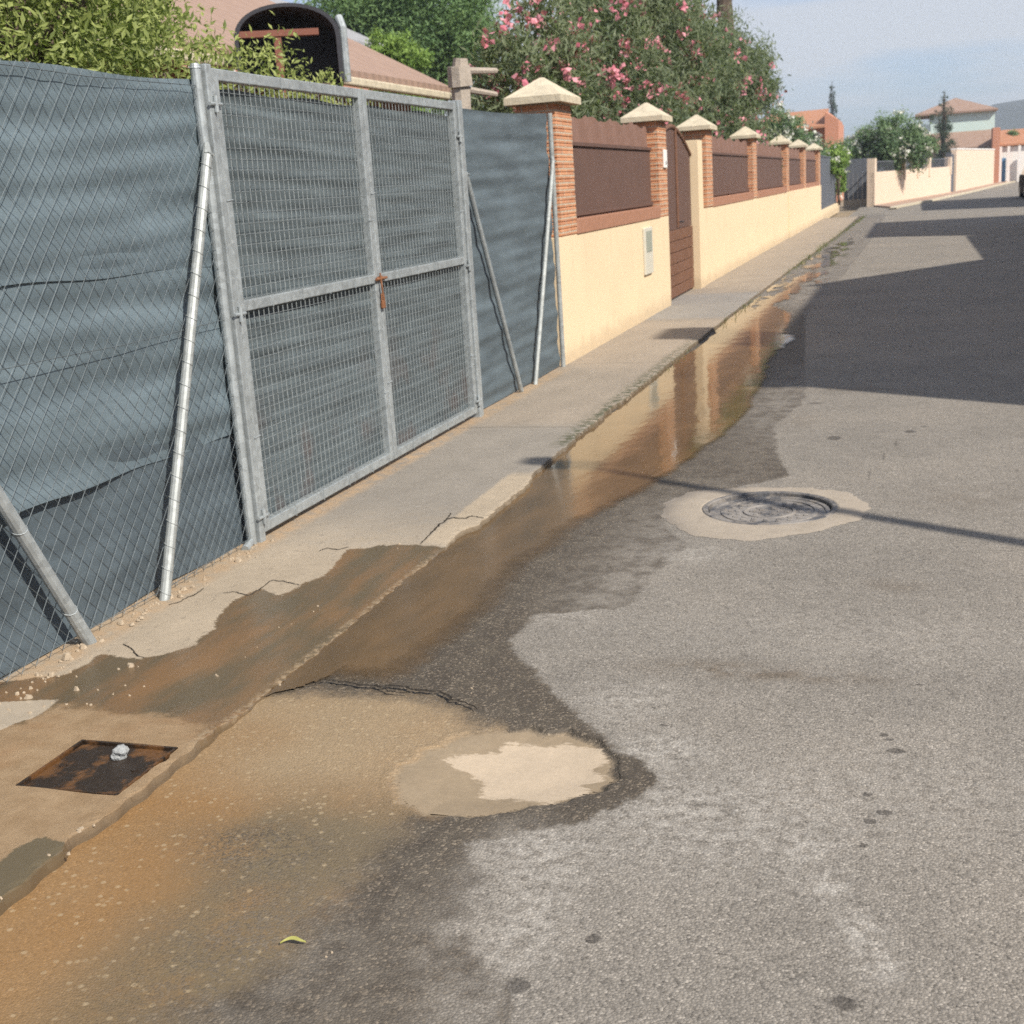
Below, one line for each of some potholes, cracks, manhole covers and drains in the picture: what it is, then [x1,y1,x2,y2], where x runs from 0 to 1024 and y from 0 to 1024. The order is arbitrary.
manhole cover [661,486,871,541]
pothole [378,721,634,824]
crack [309,679,477,709]
